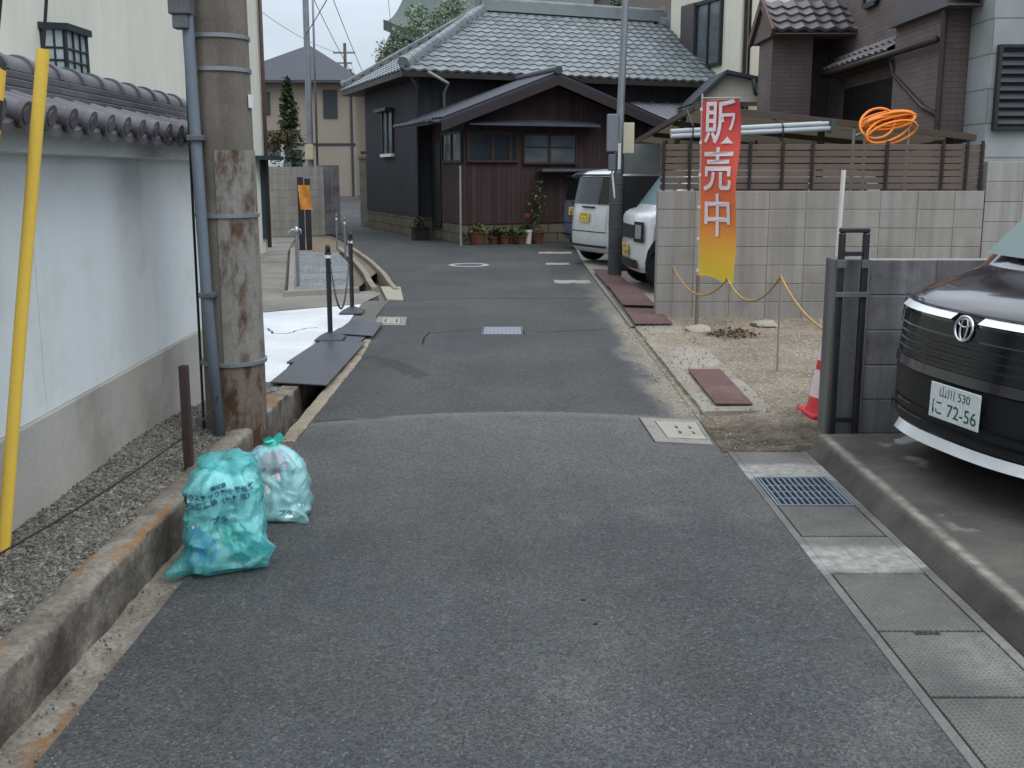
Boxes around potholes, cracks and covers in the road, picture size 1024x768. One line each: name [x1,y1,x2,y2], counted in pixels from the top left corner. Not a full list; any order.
drain grate [755,477,854,508]
